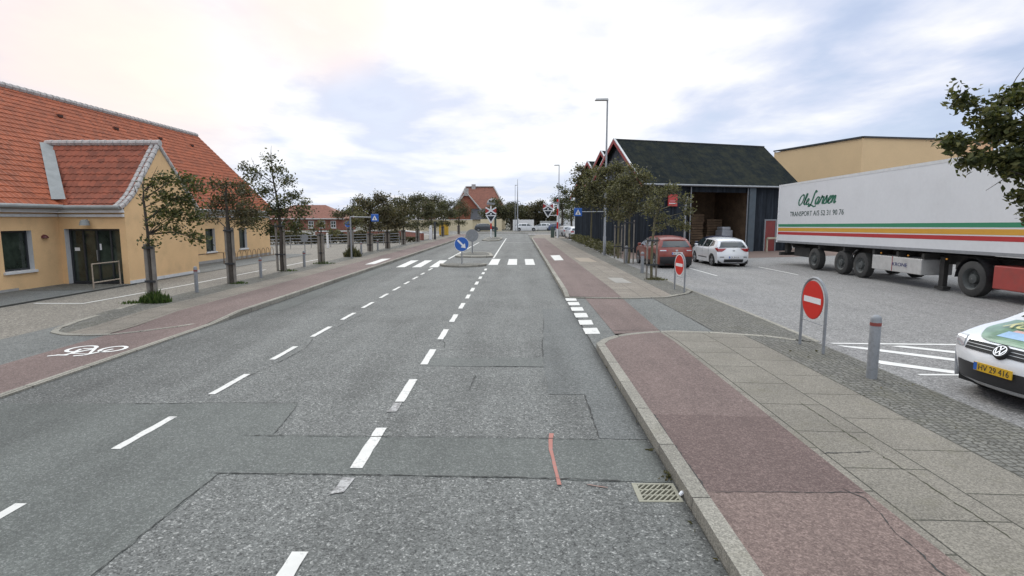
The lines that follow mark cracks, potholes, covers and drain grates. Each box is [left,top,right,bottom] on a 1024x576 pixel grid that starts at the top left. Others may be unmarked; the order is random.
drain grate [631,483,684,502]
crack [846,490,946,576]
